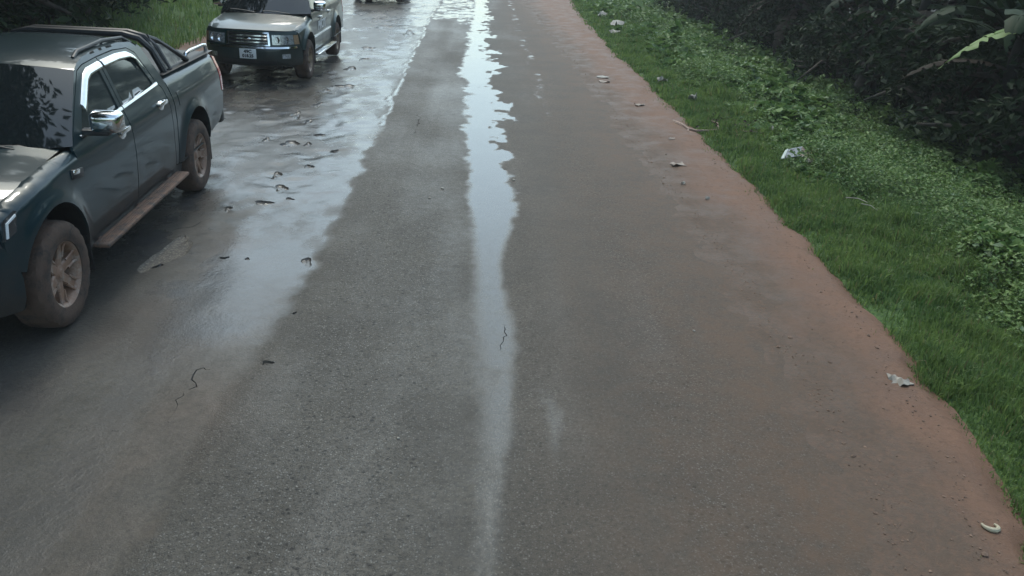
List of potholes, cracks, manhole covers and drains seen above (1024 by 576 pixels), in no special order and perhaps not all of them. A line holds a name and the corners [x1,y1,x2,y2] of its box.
crack [175,368,210,409]
